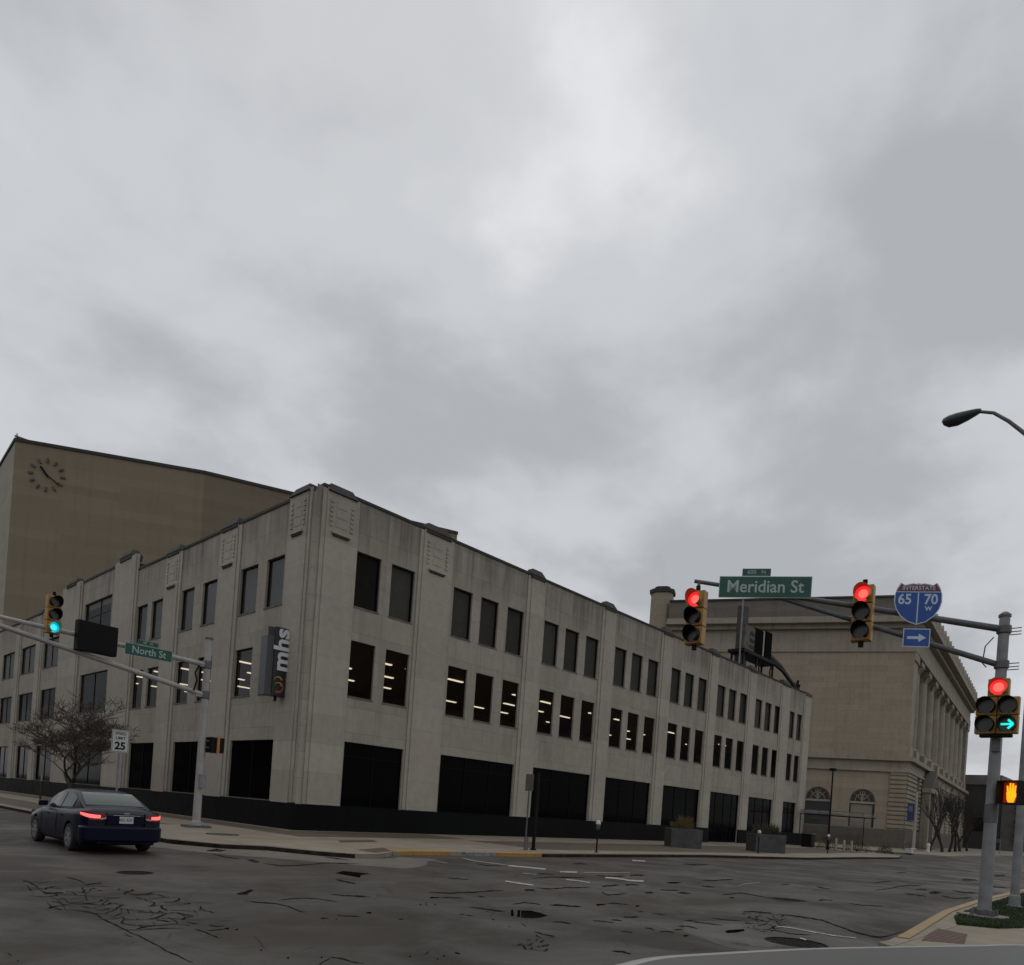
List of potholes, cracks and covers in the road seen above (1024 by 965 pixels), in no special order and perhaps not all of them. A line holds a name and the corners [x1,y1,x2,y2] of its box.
pothole [521,910,548,918]
crack [250,879,368,919]
crack [23,877,234,962]
crack [426,863,809,951]
manhole cover [764,937,828,948]
